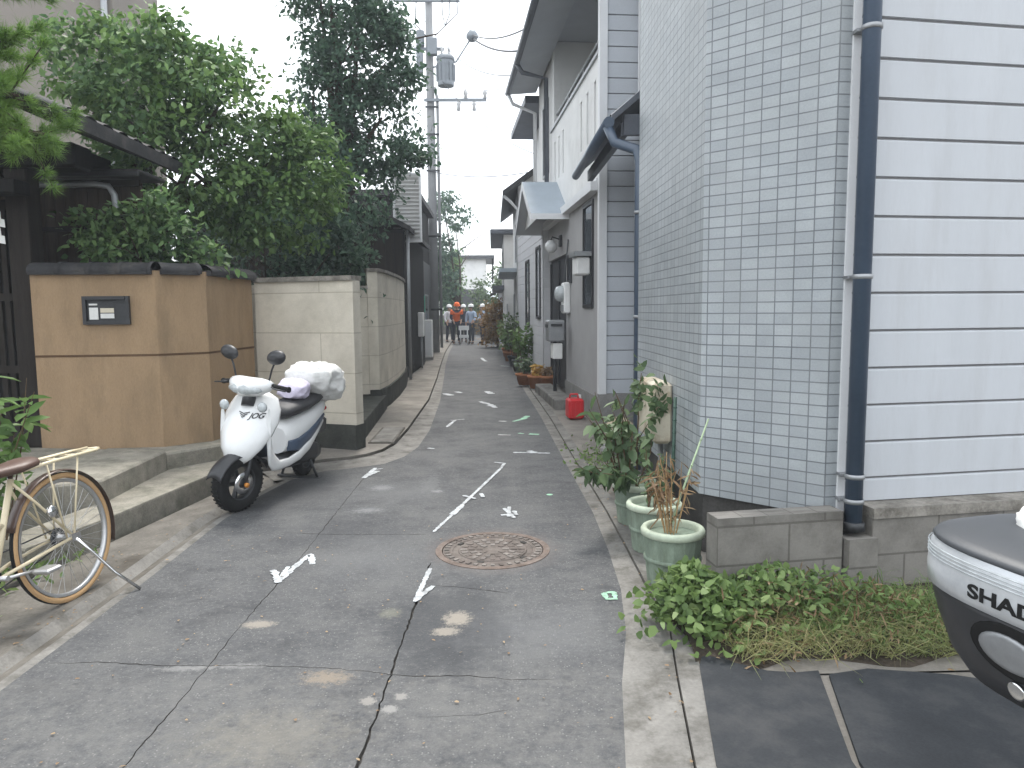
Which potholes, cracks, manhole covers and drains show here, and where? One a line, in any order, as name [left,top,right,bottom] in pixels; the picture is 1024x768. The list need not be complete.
crack [66,478,535,768]
manhole cover [436,532,550,570]
